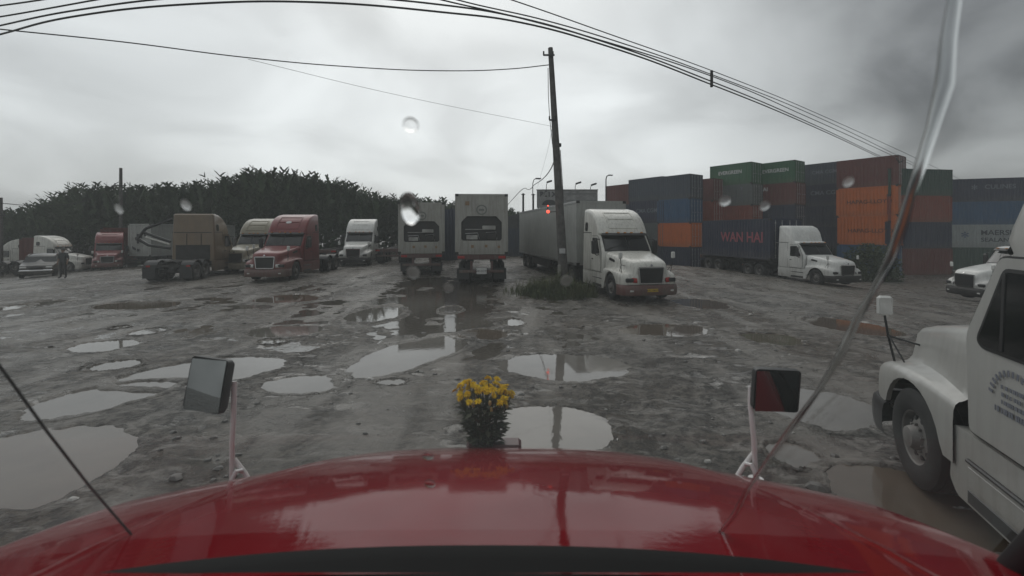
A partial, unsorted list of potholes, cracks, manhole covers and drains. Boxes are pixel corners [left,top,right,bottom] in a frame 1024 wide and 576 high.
pothole [57,338,148,354]
pothole [0,377,188,425]
pothole [80,358,148,372]
pothole [0,417,157,524]
pothole [484,351,646,385]
pothole [93,353,304,393]
pothole [484,401,629,452]
pothole [607,322,718,338]
pothole [335,305,410,324]
pothole [326,332,482,387]
pothole [249,372,354,396]
pothole [796,315,917,339]
